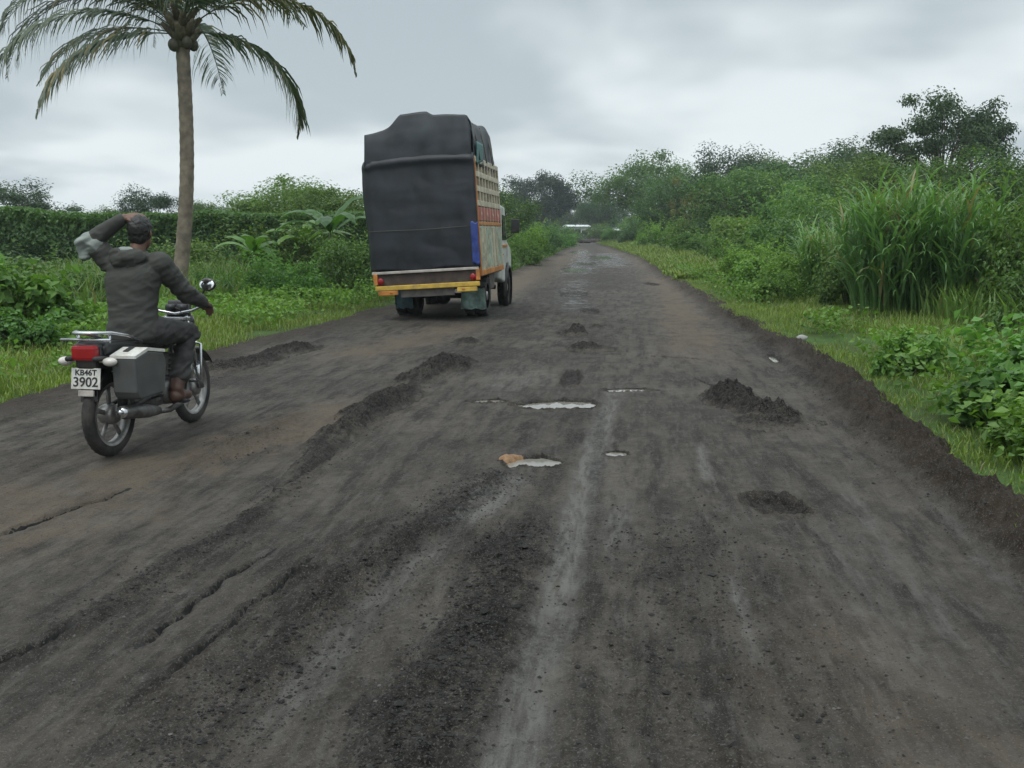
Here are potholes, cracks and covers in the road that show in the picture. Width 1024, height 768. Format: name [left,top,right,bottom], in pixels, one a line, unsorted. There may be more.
crack [133,548,315,682]
crack [0,488,132,537]
pothole [557,368,584,389]
pothole [507,397,601,411]
pothole [497,453,567,468]
